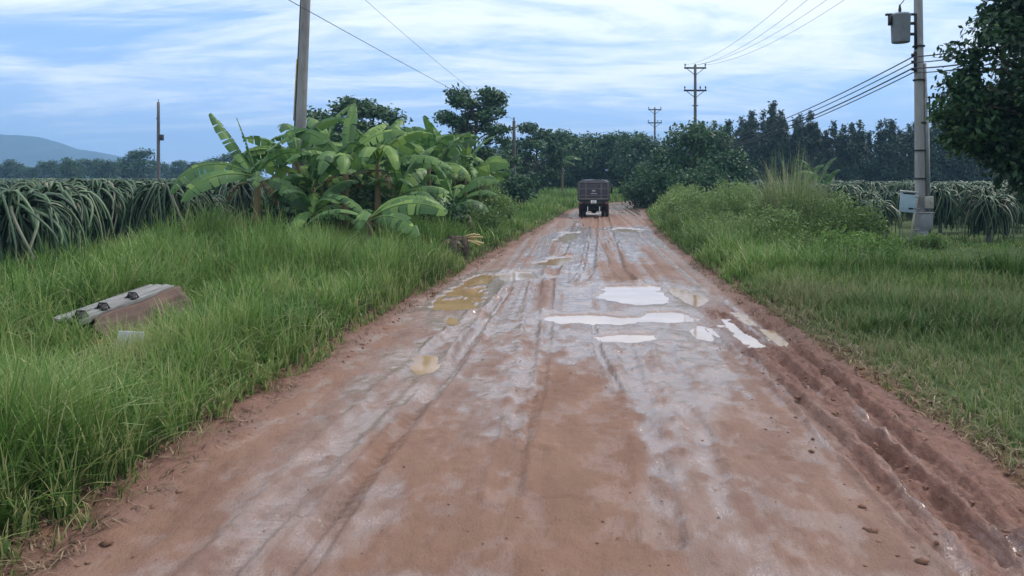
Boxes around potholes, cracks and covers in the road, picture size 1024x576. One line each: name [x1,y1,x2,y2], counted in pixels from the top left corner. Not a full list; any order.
pothole [590,284,675,305]
pothole [714,317,768,348]
pothole [537,310,704,325]
pothole [665,287,711,307]
pothole [729,311,757,327]
pothole [759,329,789,348]
pothole [594,333,660,343]
pothole [430,273,499,312]
pothole [405,353,449,375]
